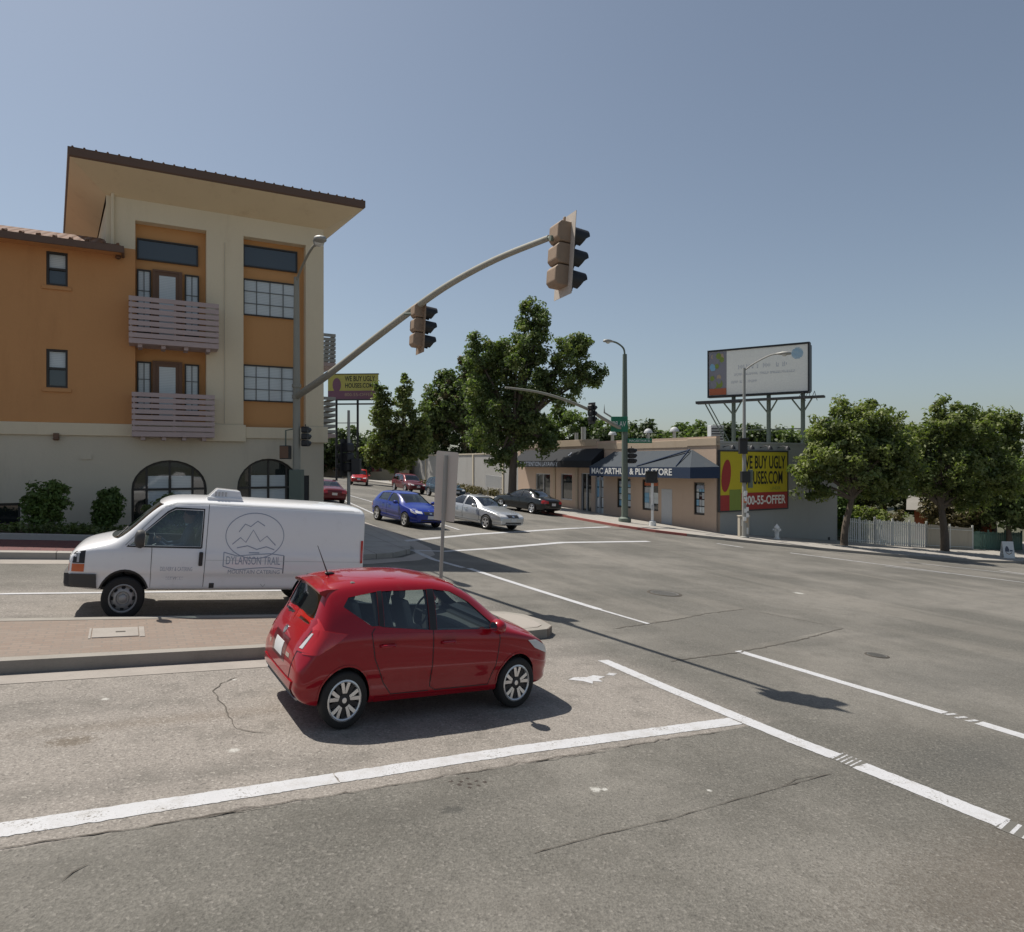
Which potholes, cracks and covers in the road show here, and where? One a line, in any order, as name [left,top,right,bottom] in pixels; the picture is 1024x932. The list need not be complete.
crack [212,677,269,733]
utility cover [88,626,145,639]
crack [534,773,830,853]
